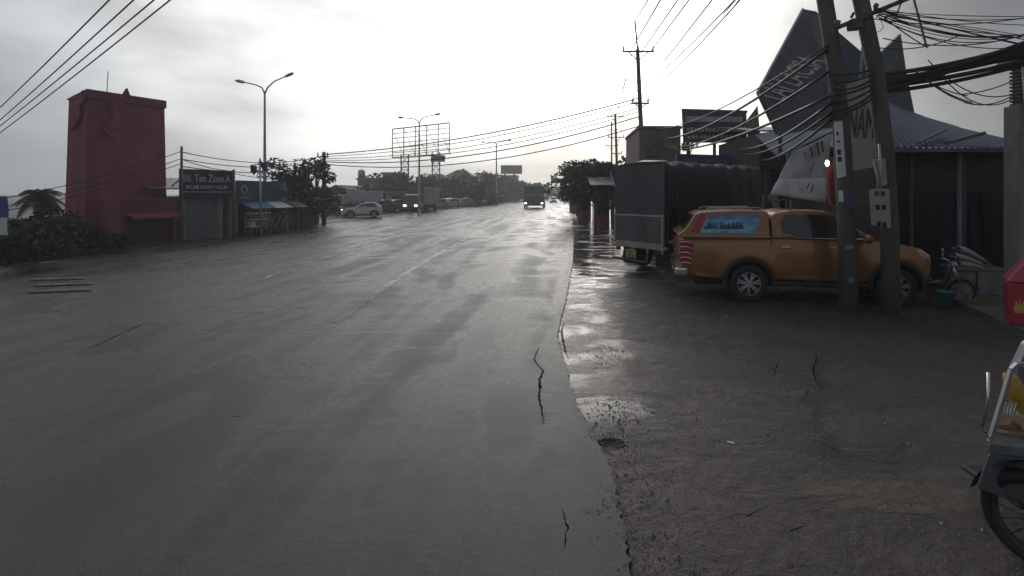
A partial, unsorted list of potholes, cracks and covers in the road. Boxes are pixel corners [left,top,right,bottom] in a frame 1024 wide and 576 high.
crack [89,321,149,349]
pothole [597,438,627,451]
crack [800,352,818,402]
crack [533,323,569,424]
